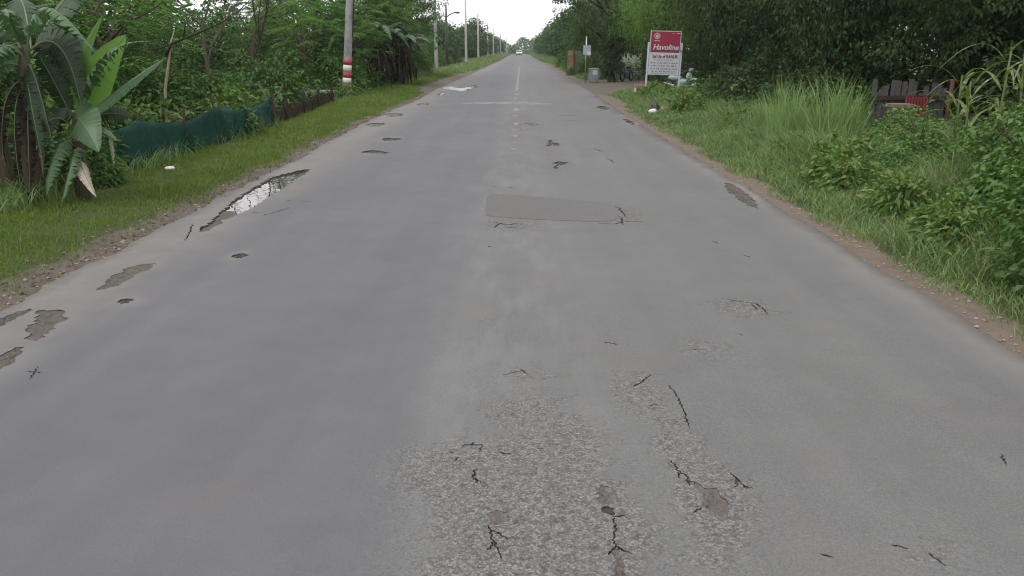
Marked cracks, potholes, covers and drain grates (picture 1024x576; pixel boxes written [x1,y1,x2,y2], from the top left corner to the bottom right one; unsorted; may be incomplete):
pothole [199,169,310,232]
pothole [724,183,759,209]
crack [730,472,753,489]
crack [486,526,508,559]
pothole [24,310,68,341]
crack [671,460,702,513]
crack [451,442,543,484]
crack [631,375,690,428]
crack [608,515,633,555]
pothole [96,263,155,290]
